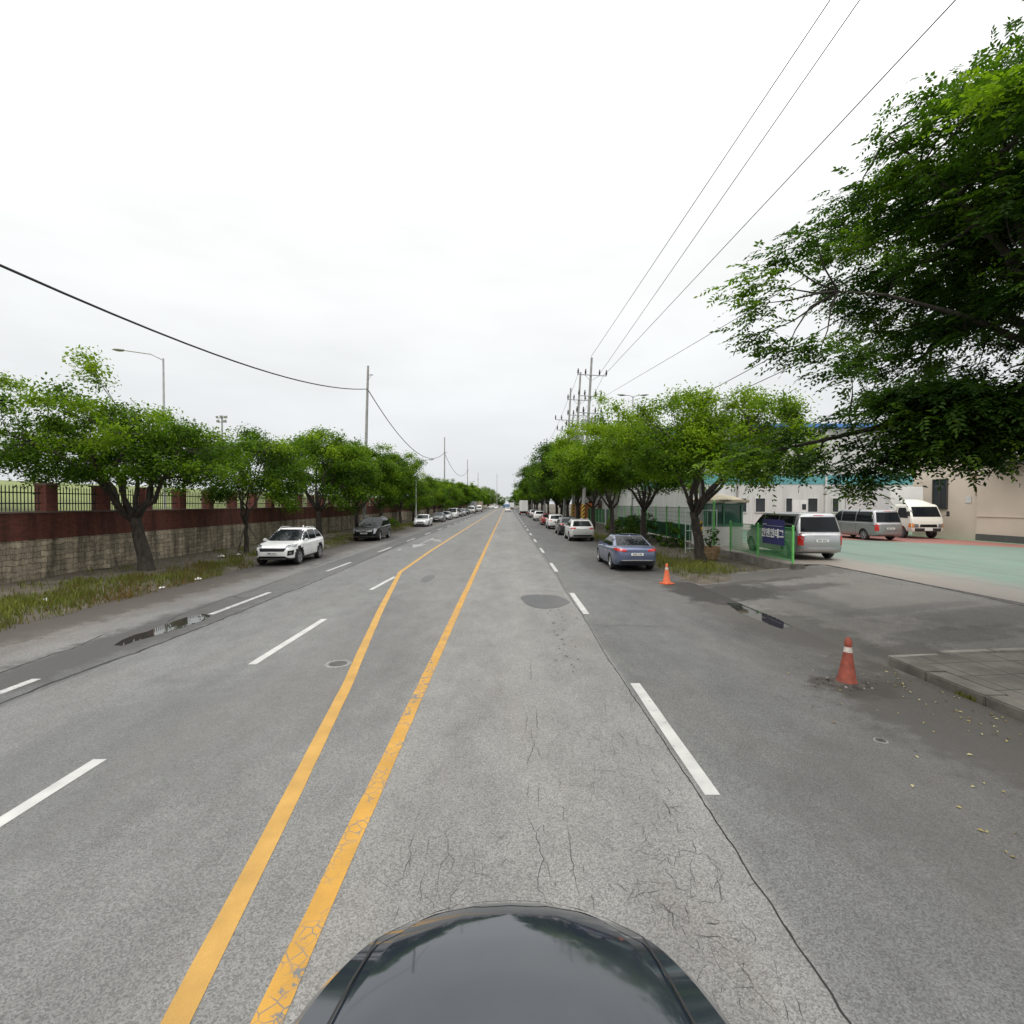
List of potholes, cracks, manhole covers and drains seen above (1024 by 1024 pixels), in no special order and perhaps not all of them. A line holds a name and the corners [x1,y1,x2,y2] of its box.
crack [478,660,567,768]
crack [380,808,512,919]
manhole cover [323,660,352,668]
crack [533,668,803,1018]
